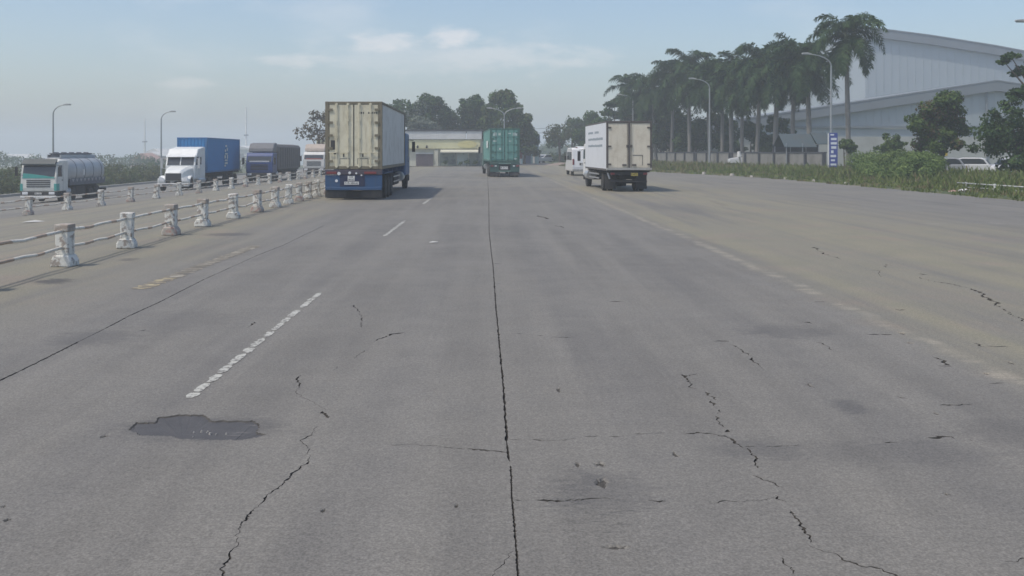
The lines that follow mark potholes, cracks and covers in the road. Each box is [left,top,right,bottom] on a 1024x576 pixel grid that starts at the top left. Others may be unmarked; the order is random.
crack [219,375,330,576]
crack [389,374,972,576]
crack [919,274,1024,321]
pothole [129,414,266,440]
